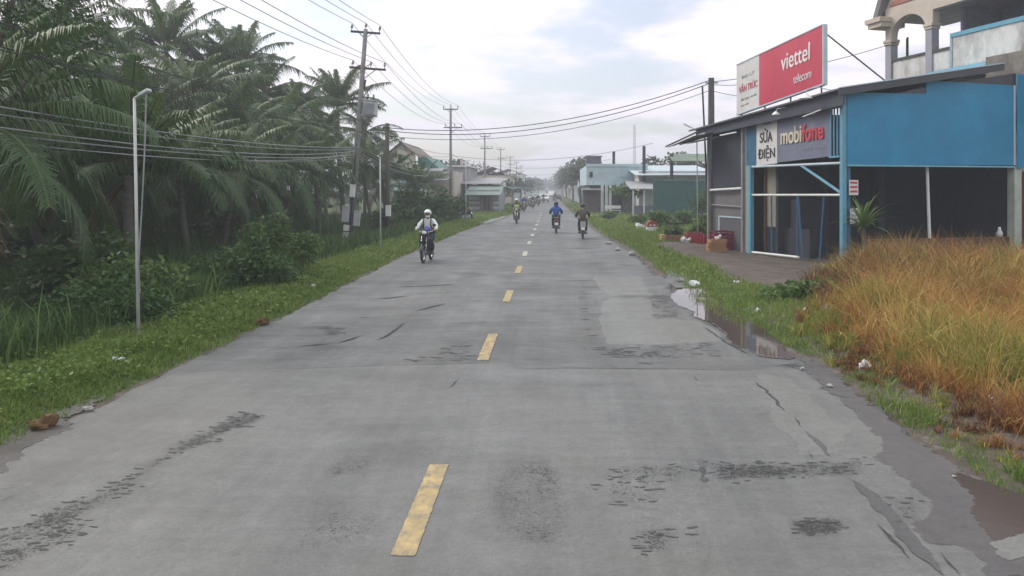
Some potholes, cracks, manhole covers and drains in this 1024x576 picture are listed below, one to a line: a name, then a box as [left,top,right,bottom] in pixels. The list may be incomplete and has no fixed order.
crack [849,478,961,575]
crack [754,381,830,457]
crack [376,284,449,339]
pothole [782,514,858,541]
